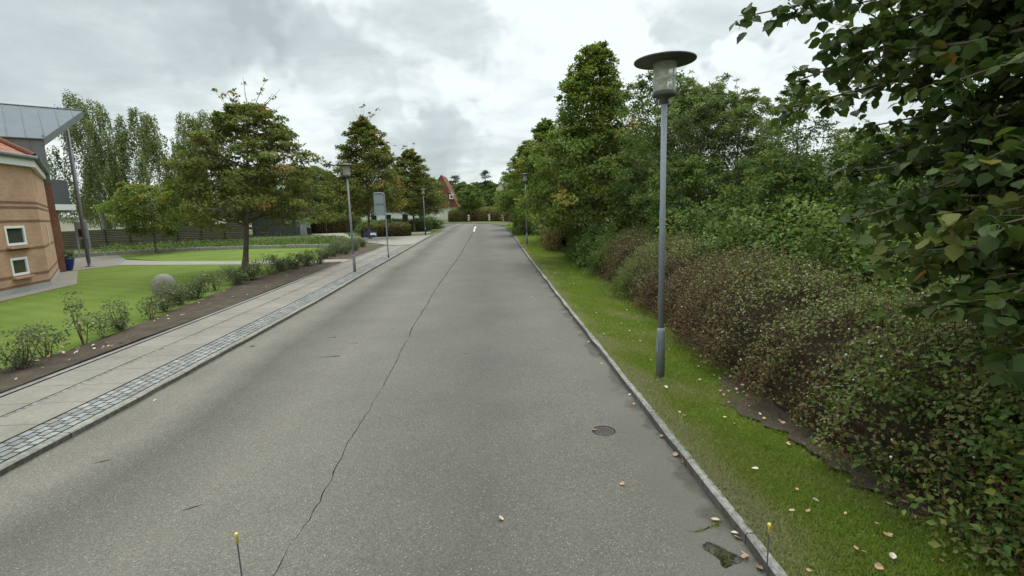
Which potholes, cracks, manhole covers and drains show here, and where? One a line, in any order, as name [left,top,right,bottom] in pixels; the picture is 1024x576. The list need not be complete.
manhole cover [592,426,616,436]
pothole [702,542,744,568]
crack [273,233,473,576]
